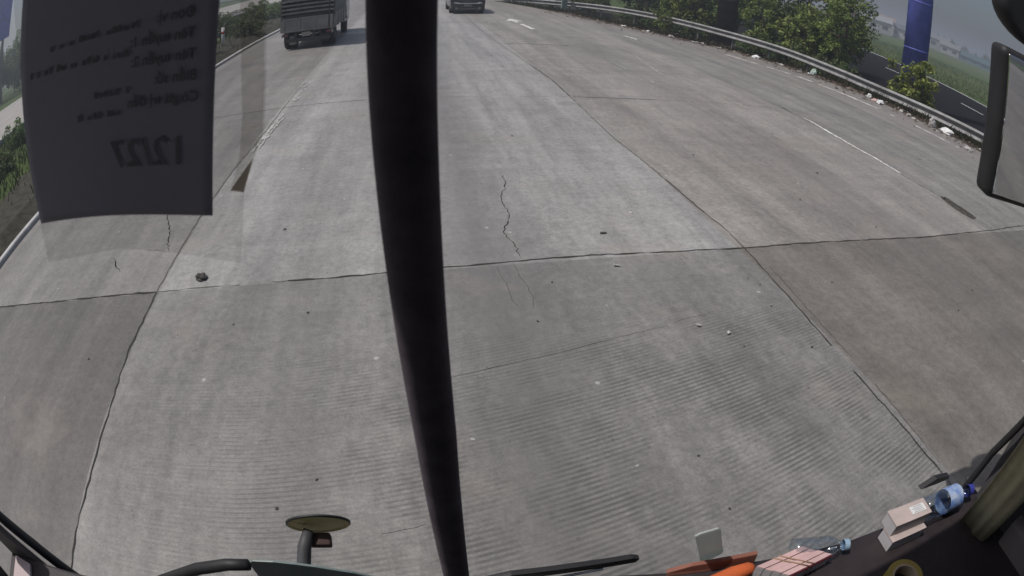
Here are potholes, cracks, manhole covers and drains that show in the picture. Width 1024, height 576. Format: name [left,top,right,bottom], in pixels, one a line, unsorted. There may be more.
crack [497,175,534,307]
